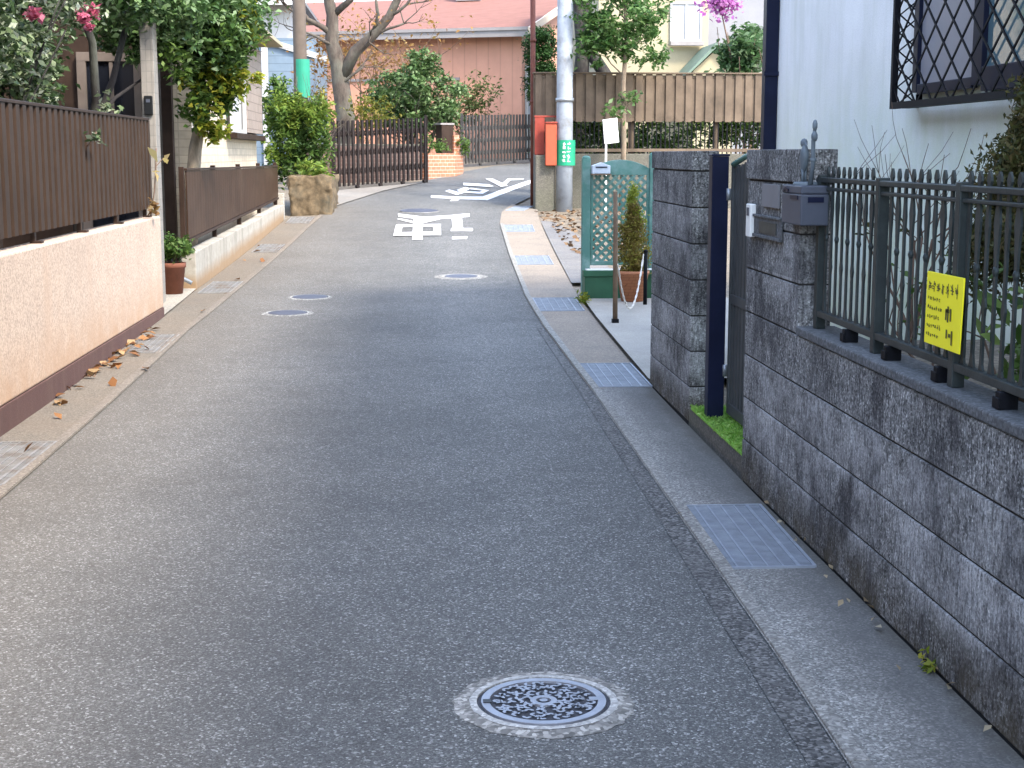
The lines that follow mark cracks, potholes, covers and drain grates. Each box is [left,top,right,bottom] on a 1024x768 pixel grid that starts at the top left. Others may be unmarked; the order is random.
drain grate [0,441,57,486]
drain grate [533,297,585,311]
drain grate [580,363,652,388]
drain grate [251,244,285,253]
drain grate [514,255,554,265]
drain grate [120,334,180,354]
manhole cover [451,671,635,739]
drain grate [197,281,243,294]
drain grate [687,504,817,569]
